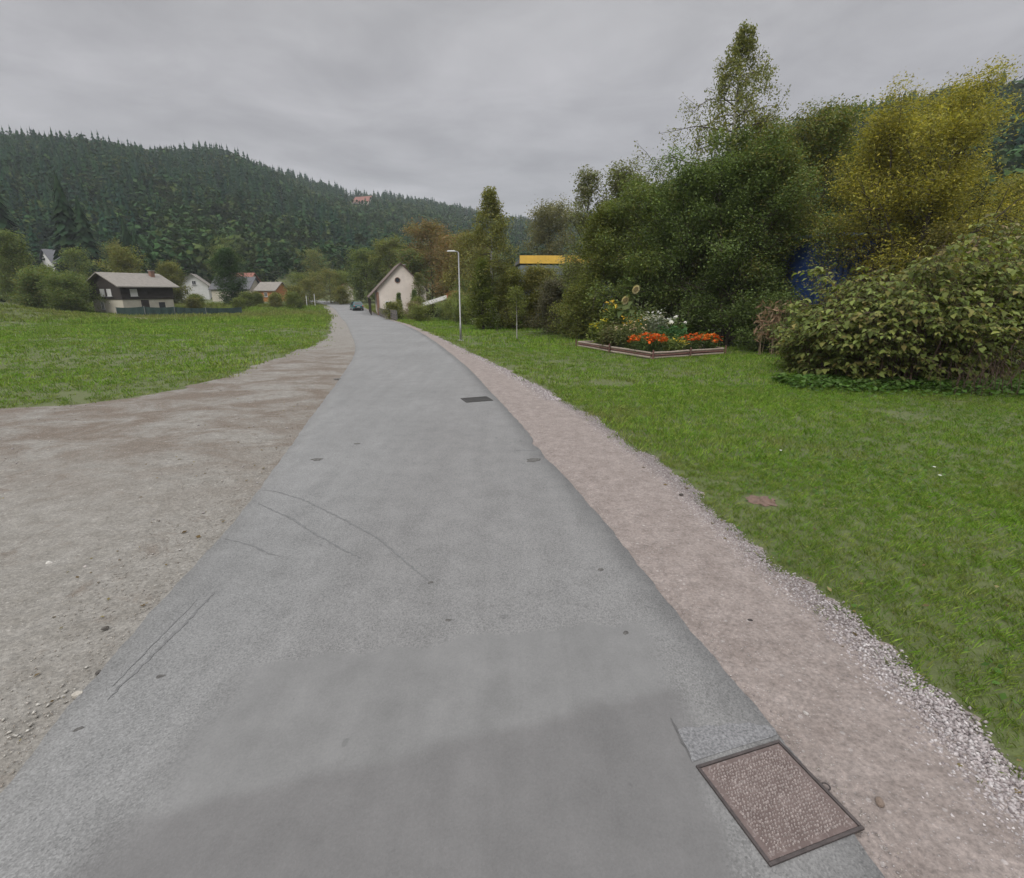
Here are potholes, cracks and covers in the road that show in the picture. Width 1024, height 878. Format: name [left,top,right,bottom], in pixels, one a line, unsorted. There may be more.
crack [224,490,428,580]
crack [107,592,215,700]
manhole cover [696,739,865,867]
